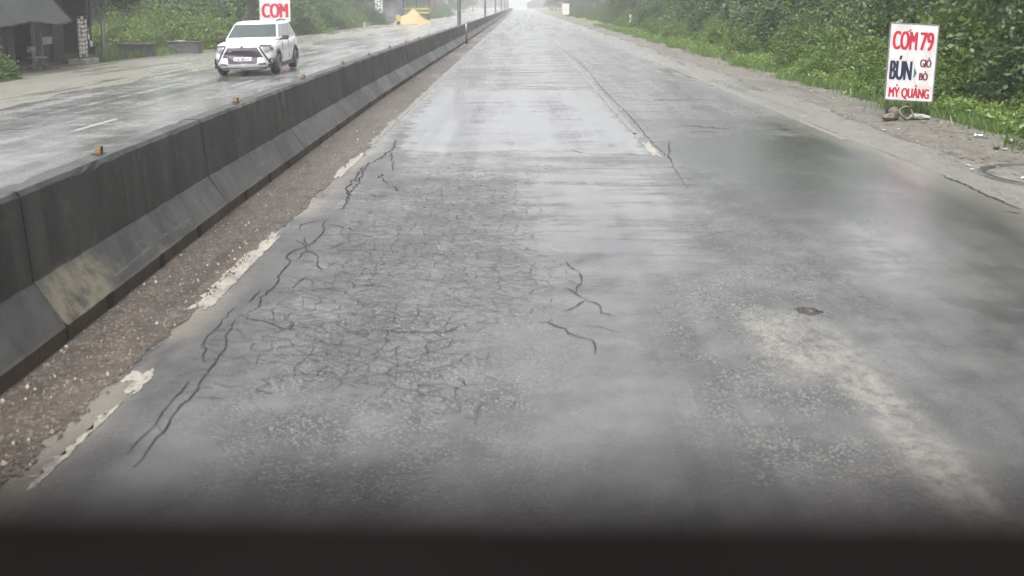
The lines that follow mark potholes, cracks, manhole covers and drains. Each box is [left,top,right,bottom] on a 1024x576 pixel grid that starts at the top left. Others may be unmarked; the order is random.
crack [128,141,580,466]
manhole cover [977,164,1024,186]
crack [538,262,620,352]
pothole [795,306,824,315]
